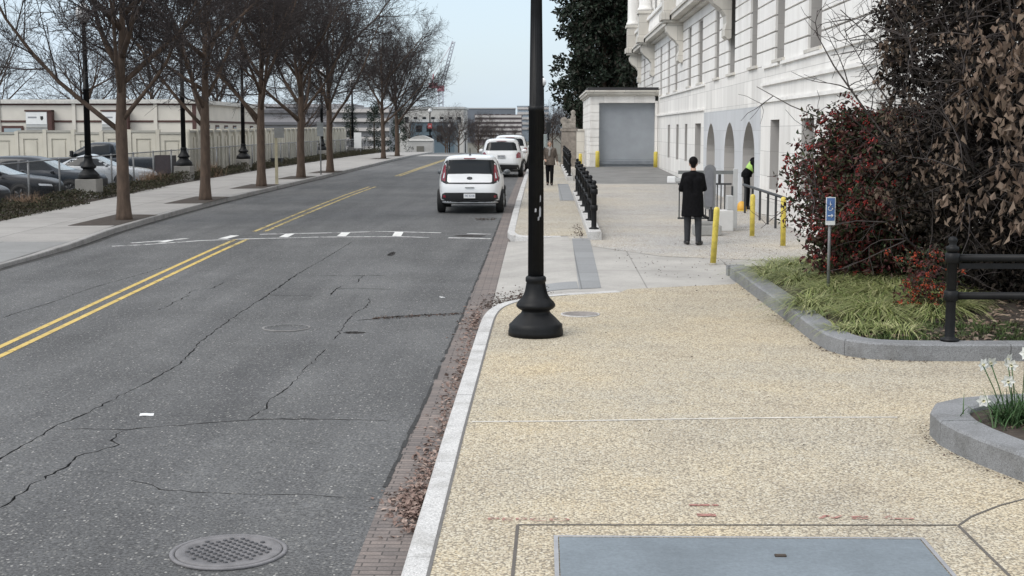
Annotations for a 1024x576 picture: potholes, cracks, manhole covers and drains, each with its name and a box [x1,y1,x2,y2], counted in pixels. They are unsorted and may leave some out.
utility cover [554,535,957,576]
manhole cover [262,324,311,332]
manhole cover [169,534,288,571]
crack [0,245,452,508]
